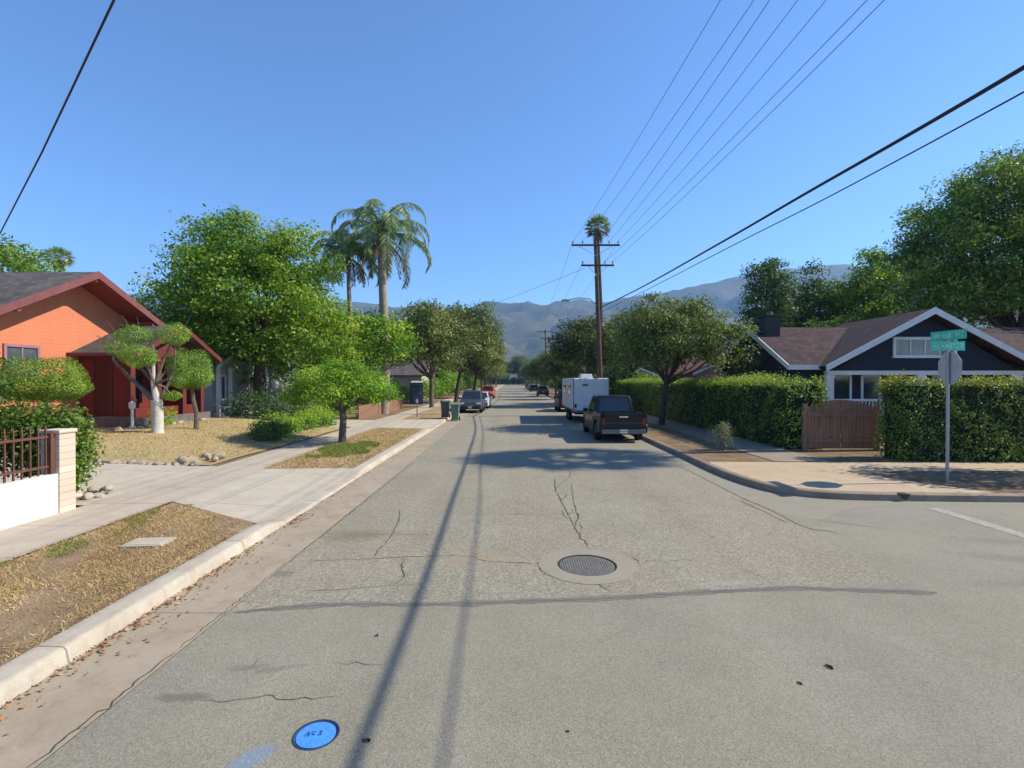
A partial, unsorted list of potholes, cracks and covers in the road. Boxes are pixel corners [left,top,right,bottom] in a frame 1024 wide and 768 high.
crack [554,472,588,547]
manhole cover [539,549,637,585]
crack [27,463,549,768]
utility cover [292,719,340,750]
